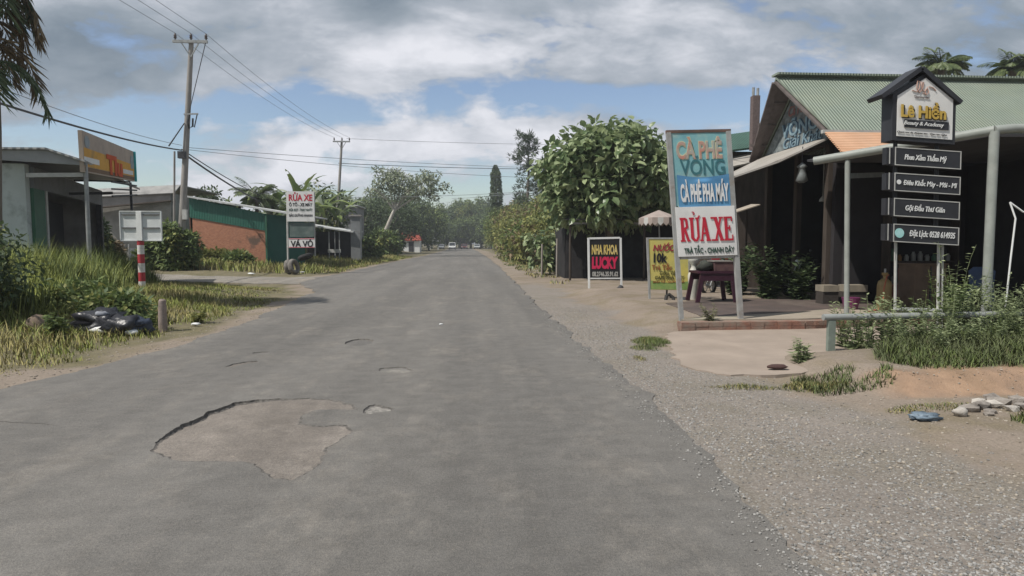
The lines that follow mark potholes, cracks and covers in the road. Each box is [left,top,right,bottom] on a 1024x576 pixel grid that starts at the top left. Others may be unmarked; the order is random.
pothole [363,404,393,414]
pothole [150,398,358,481]
